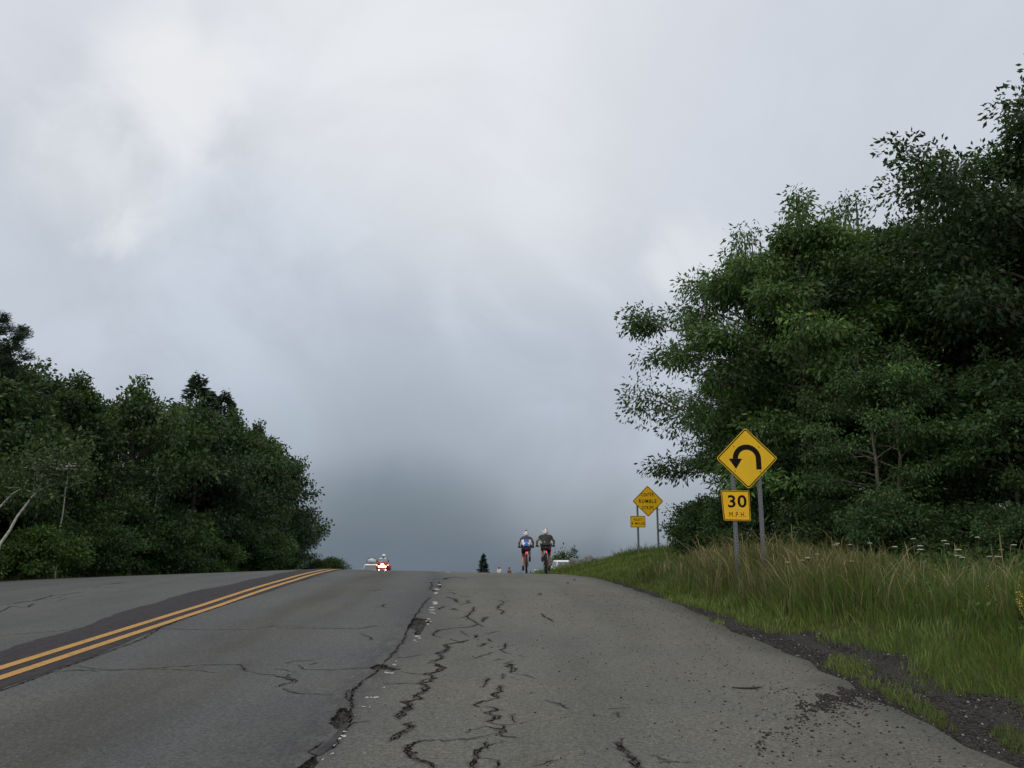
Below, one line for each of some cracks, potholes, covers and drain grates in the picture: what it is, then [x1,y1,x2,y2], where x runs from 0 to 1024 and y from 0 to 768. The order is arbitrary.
pothole [407,618,431,635]
pothole [329,708,352,729]
crack [614,739,670,768]
crack [62,577,531,768]
